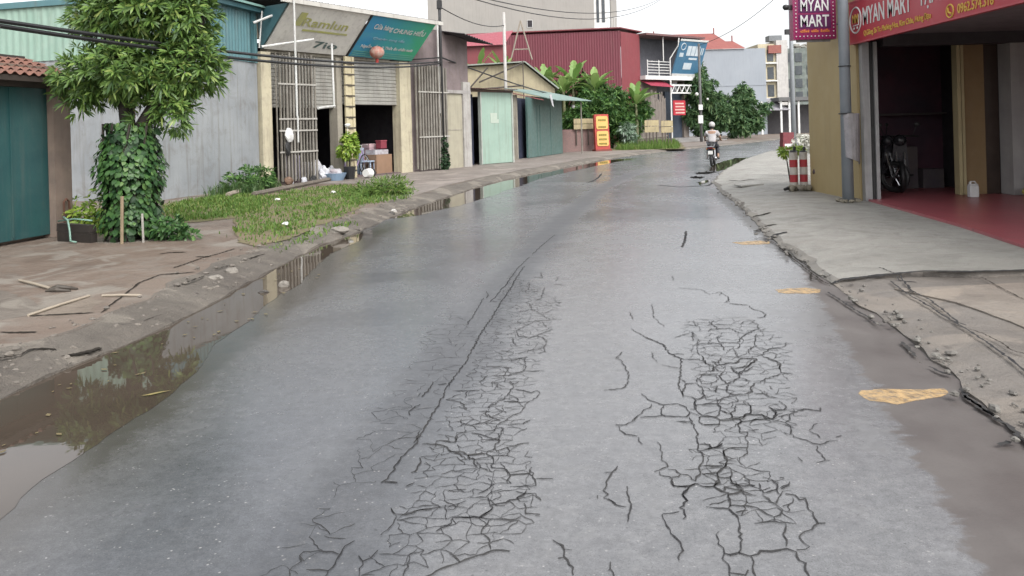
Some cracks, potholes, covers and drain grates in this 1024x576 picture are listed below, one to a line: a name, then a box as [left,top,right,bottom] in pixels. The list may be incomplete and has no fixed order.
crack [616,276,841,576]
crack [262,236,561,576]
crack [597,466,632,522]
